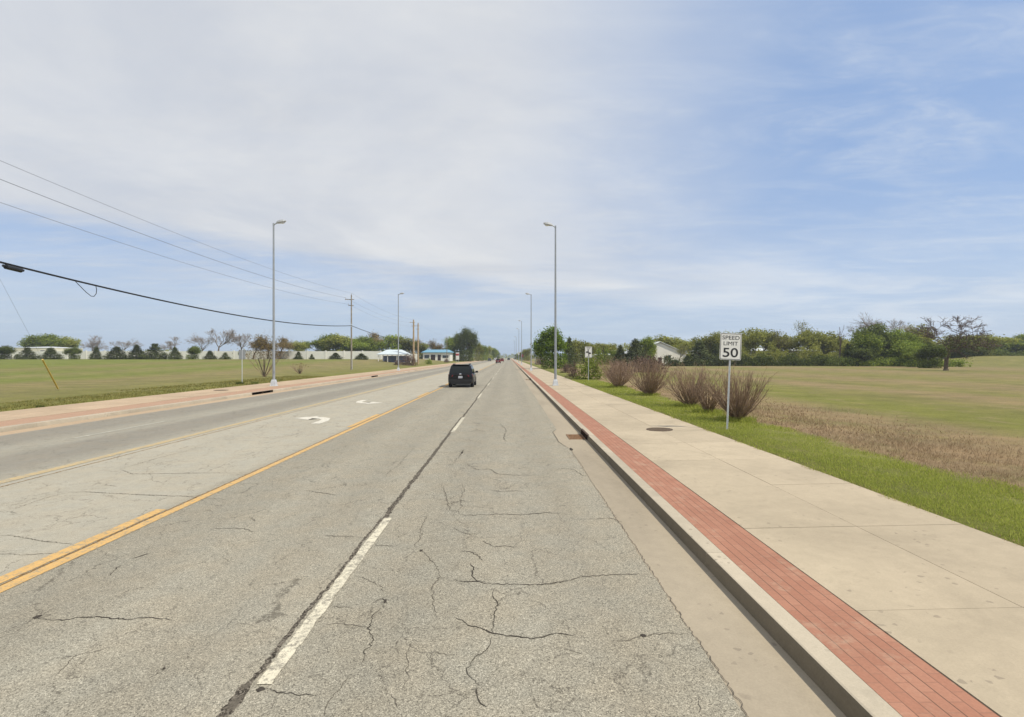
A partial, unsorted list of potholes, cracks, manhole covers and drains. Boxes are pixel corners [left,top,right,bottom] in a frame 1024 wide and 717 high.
crack [438,485,645,707]
crack [322,576,387,662]
crack [414,519,441,615]
crack [4,609,169,634]
drain grate [566,429,594,440]
